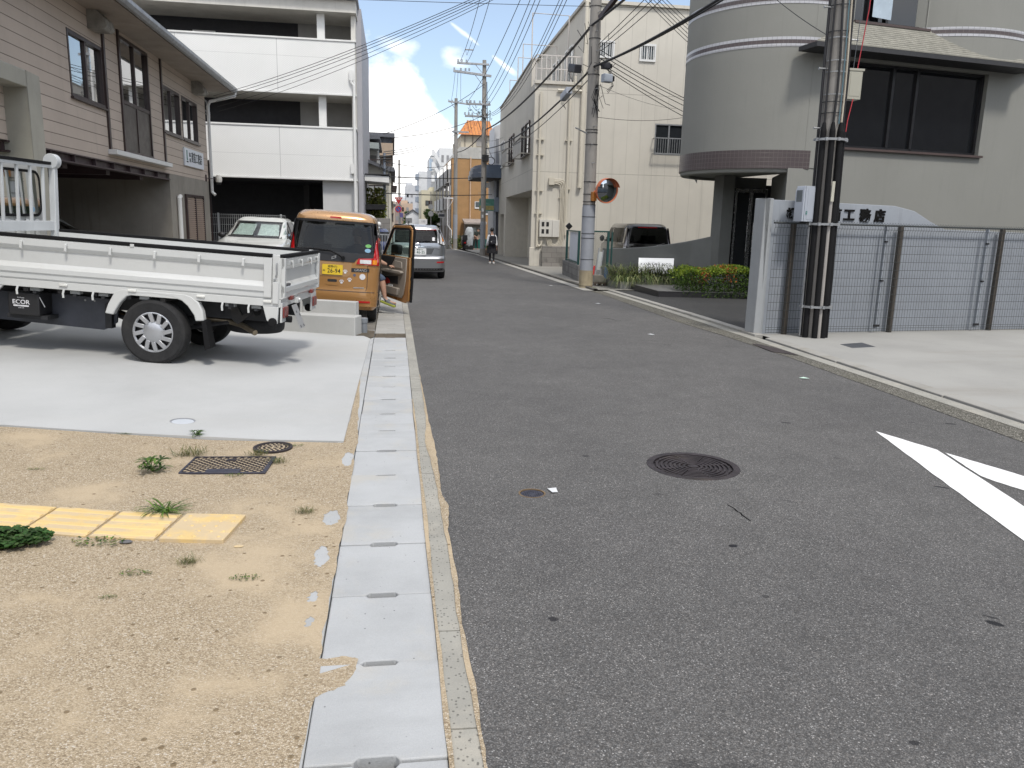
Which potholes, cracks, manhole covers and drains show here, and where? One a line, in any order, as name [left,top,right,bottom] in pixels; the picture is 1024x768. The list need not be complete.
manhole cover [518,489,546,498]
manhole cover [253,441,293,454]
manhole cover [647,452,740,480]
